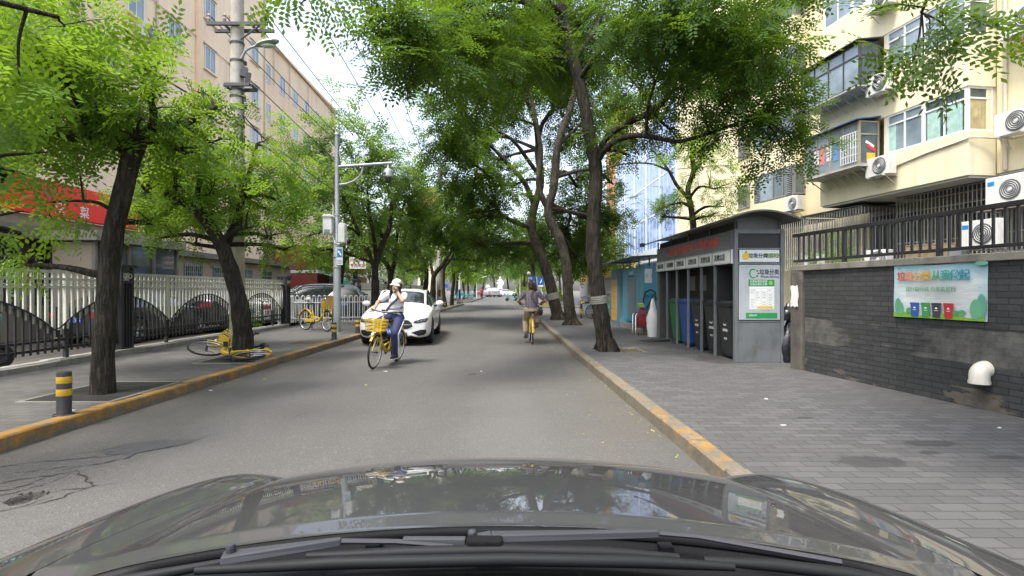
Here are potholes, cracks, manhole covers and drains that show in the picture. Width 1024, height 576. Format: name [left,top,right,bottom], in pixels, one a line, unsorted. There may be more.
crack [0,435,208,511]
pothole [3,490,50,506]
